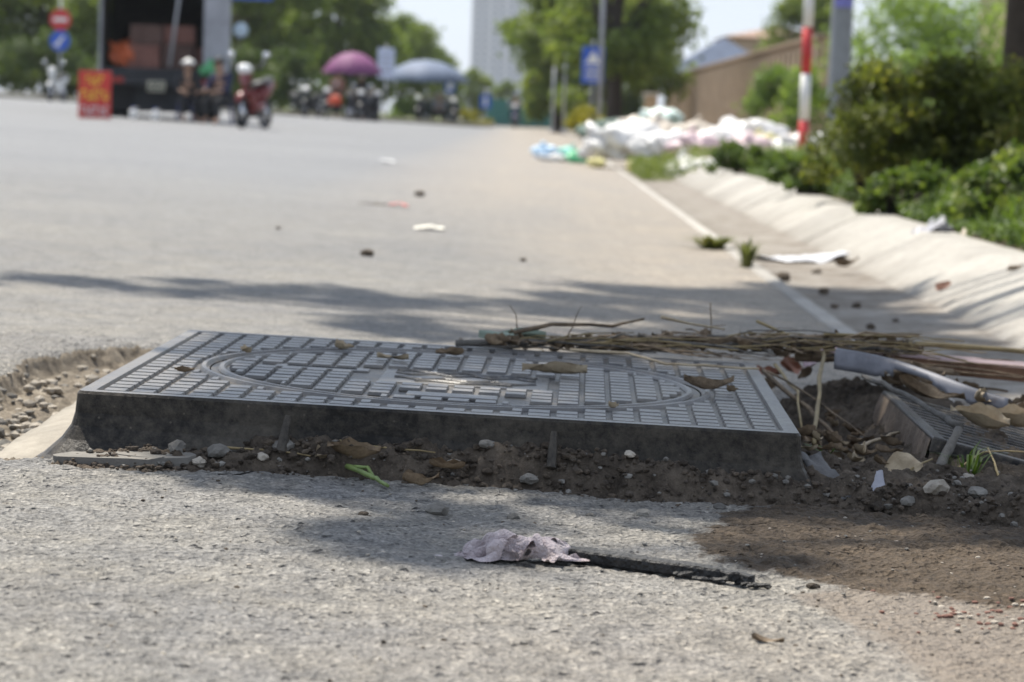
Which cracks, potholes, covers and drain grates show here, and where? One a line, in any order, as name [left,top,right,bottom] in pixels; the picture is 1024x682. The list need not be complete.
drain grate [873,391,1024,466]
pothole [0,345,153,461]
manhole cover [0,330,812,485]
